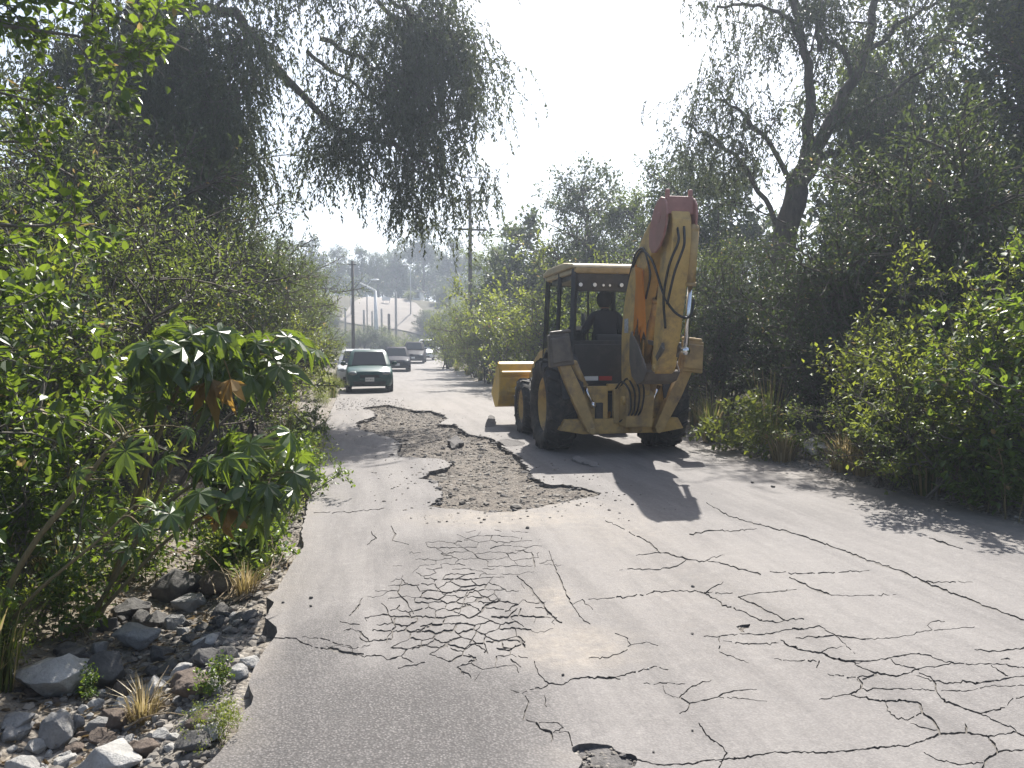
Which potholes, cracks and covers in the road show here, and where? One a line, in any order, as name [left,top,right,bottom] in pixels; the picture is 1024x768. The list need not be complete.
pothole [355,405,601,513]
crack [274,520,1024,768]
pothole [572,743,637,768]
